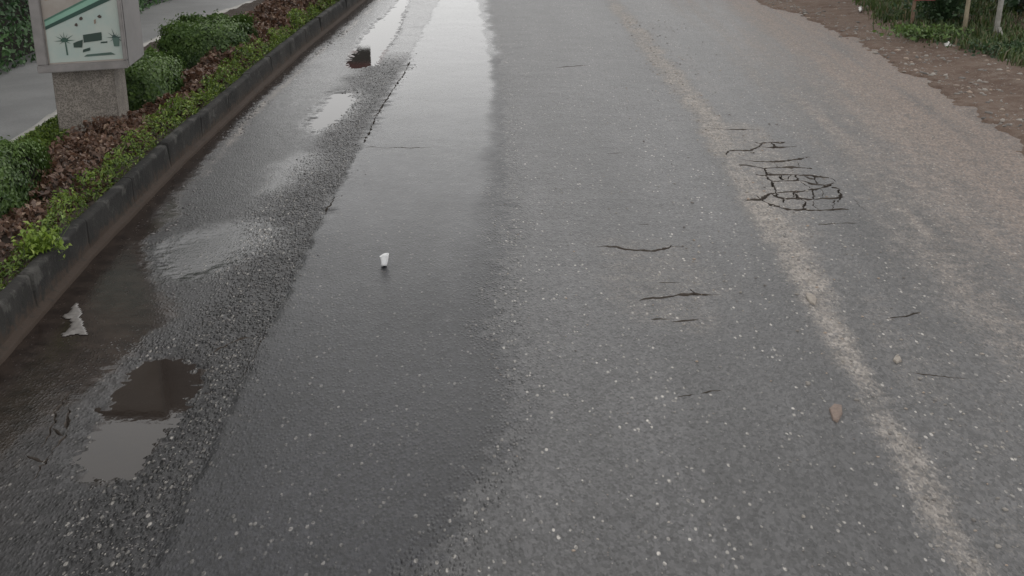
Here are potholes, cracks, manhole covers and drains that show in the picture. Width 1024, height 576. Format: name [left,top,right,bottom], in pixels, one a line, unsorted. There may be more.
crack [639,282,721,301]
crack [26,390,72,480]
crack [714,128,868,225]
